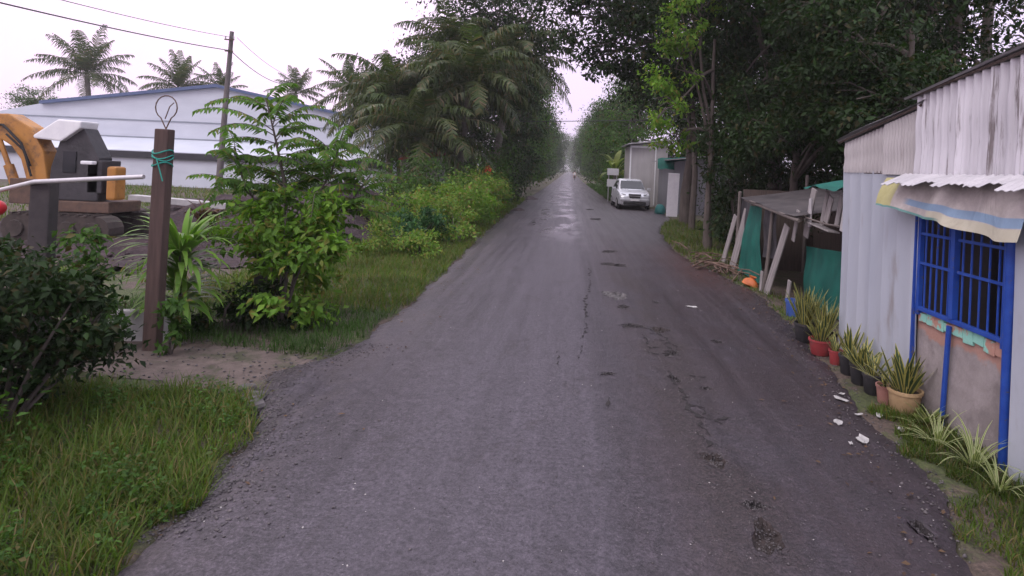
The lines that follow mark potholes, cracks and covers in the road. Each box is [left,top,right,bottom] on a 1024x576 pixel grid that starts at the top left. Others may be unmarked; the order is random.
pothole [739,498,771,512]
crack [641,327,730,448]
crack [578,268,592,358]
pothole [695,450,733,472]
pothole [747,511,790,562]
pothole [906,516,939,547]
